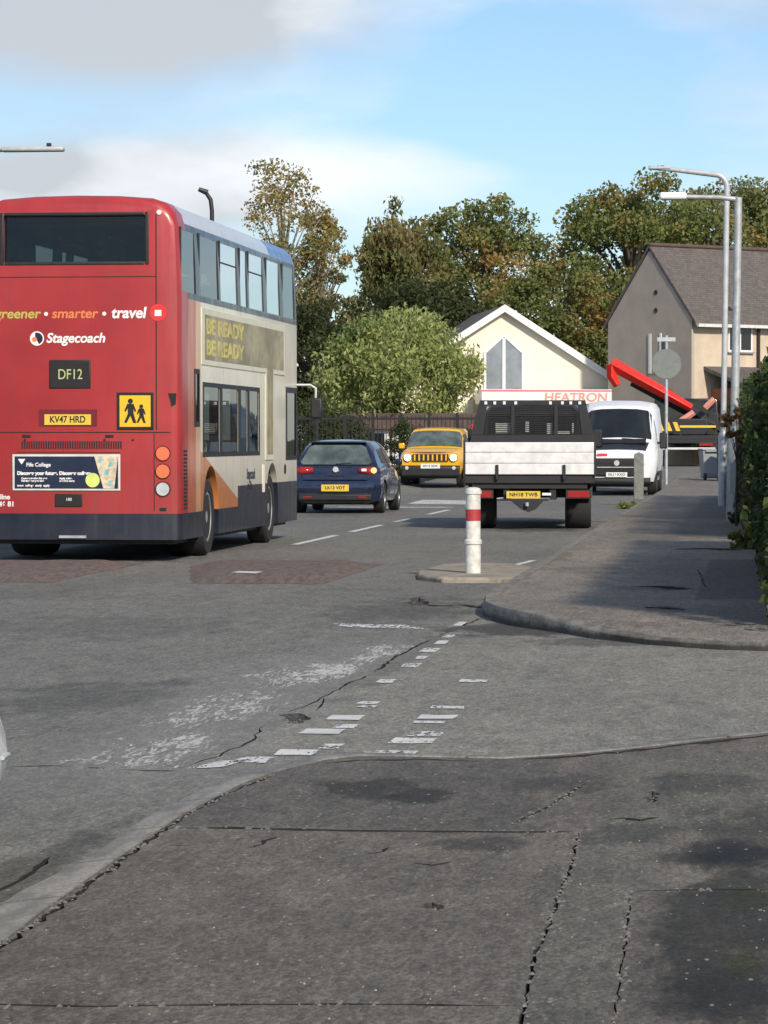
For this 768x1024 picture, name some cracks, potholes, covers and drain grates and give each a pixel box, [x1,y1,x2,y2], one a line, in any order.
pothole [279,713,311,724]
crack [286,605,482,713]
pothole [404,597,429,606]
crack [511,780,590,824]
